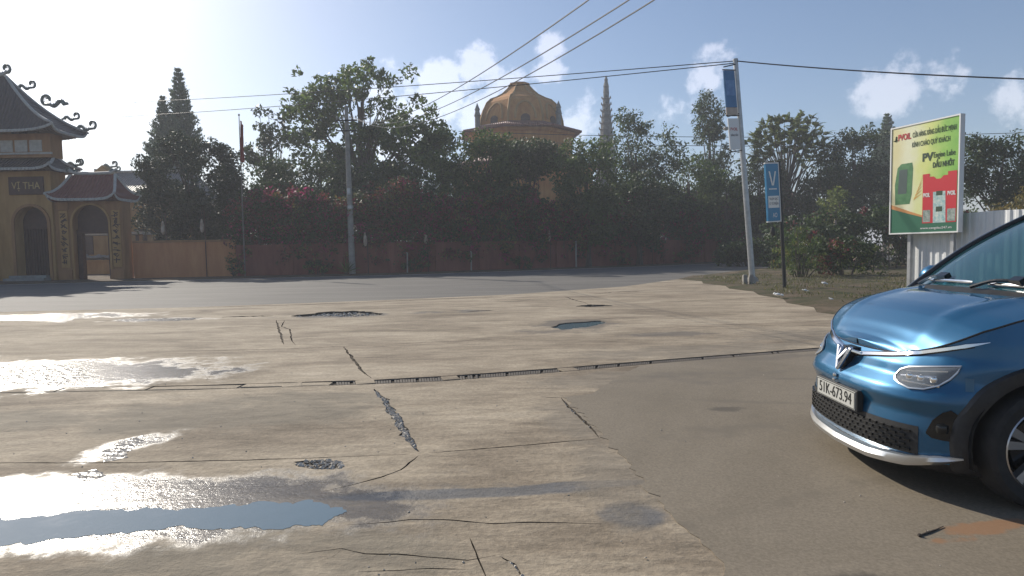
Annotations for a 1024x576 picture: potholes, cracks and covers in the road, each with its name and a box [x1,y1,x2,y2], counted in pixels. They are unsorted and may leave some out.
pothole [295,458,345,469]
crack [549,397,599,437]
crack [179,295,510,491]
crack [302,519,594,576]
pothole [552,321,606,330]
